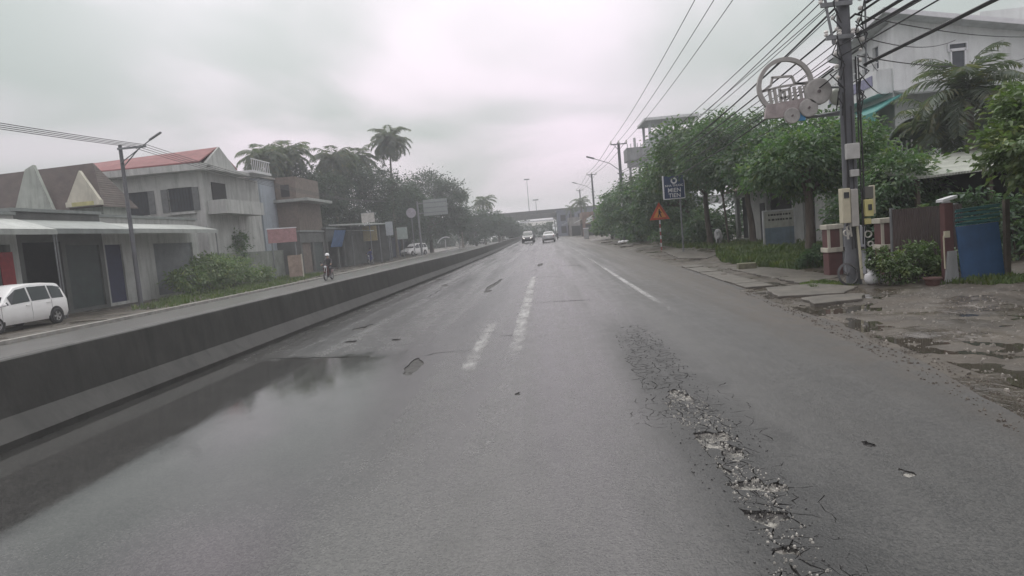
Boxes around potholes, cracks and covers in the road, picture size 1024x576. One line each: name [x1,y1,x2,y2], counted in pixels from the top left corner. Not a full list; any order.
pothole [693,431,745,462]
pothole [668,389,695,405]
crack [622,326,869,576]
pothole [725,476,789,493]
pothole [739,508,790,530]
pothole [403,358,424,375]
